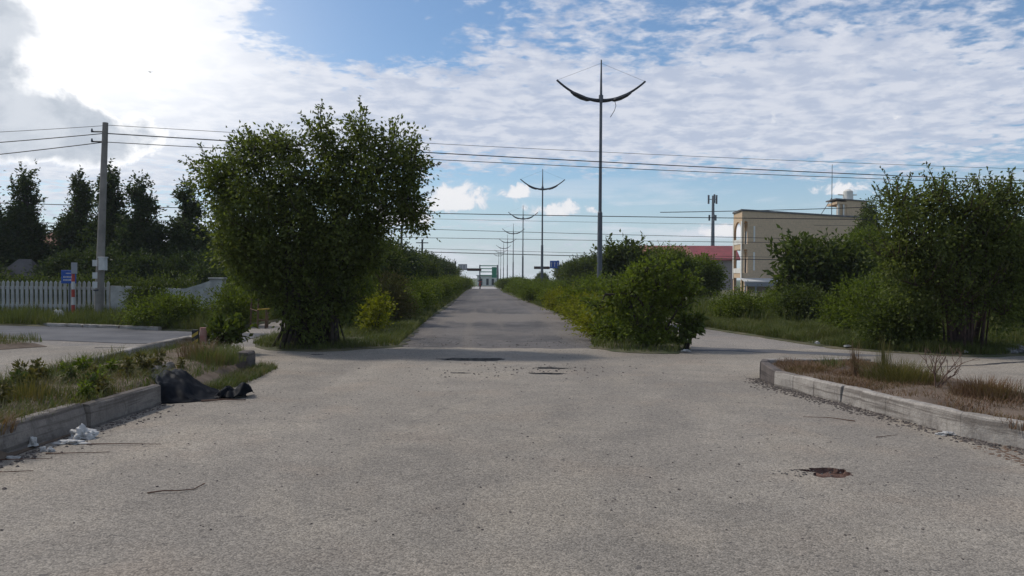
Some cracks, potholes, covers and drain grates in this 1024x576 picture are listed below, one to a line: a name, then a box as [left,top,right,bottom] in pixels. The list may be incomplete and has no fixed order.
pothole [798,467,852,478]
